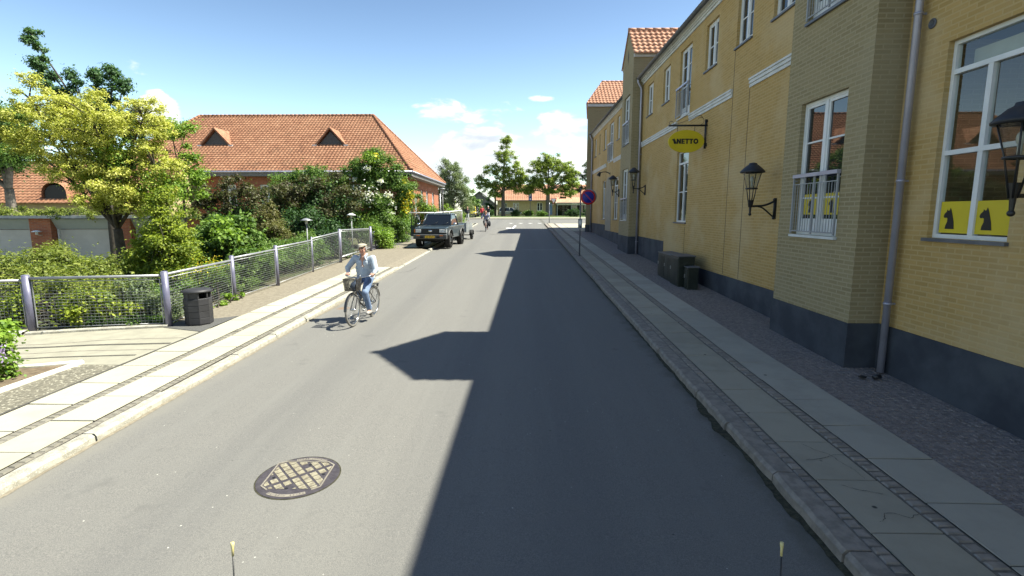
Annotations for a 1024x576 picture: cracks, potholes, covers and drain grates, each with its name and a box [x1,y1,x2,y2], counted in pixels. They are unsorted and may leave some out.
manhole cover [254,457,341,500]
